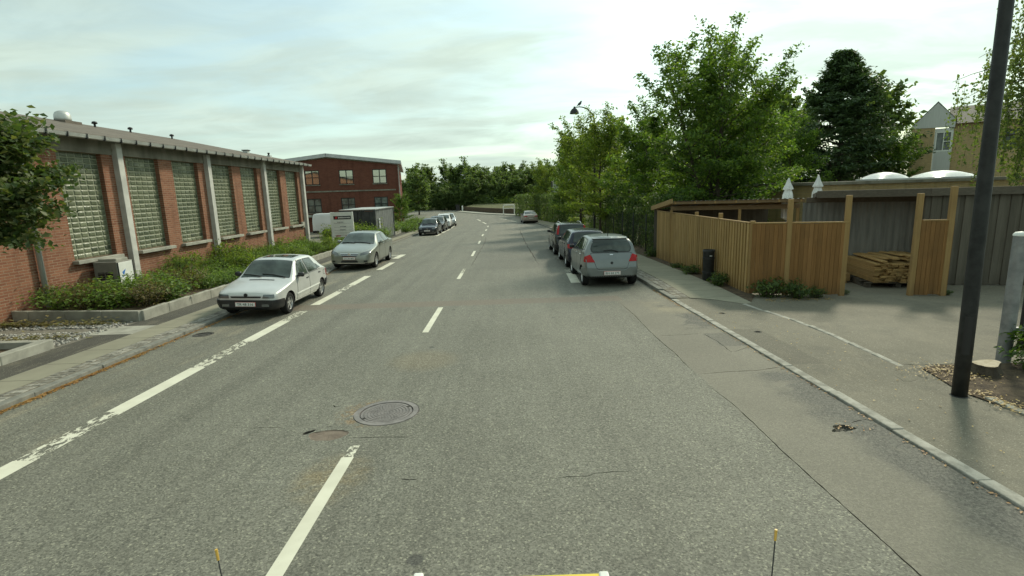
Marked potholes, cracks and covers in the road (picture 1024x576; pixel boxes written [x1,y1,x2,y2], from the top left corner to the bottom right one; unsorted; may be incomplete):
manhole cover [353,400,419,426]
